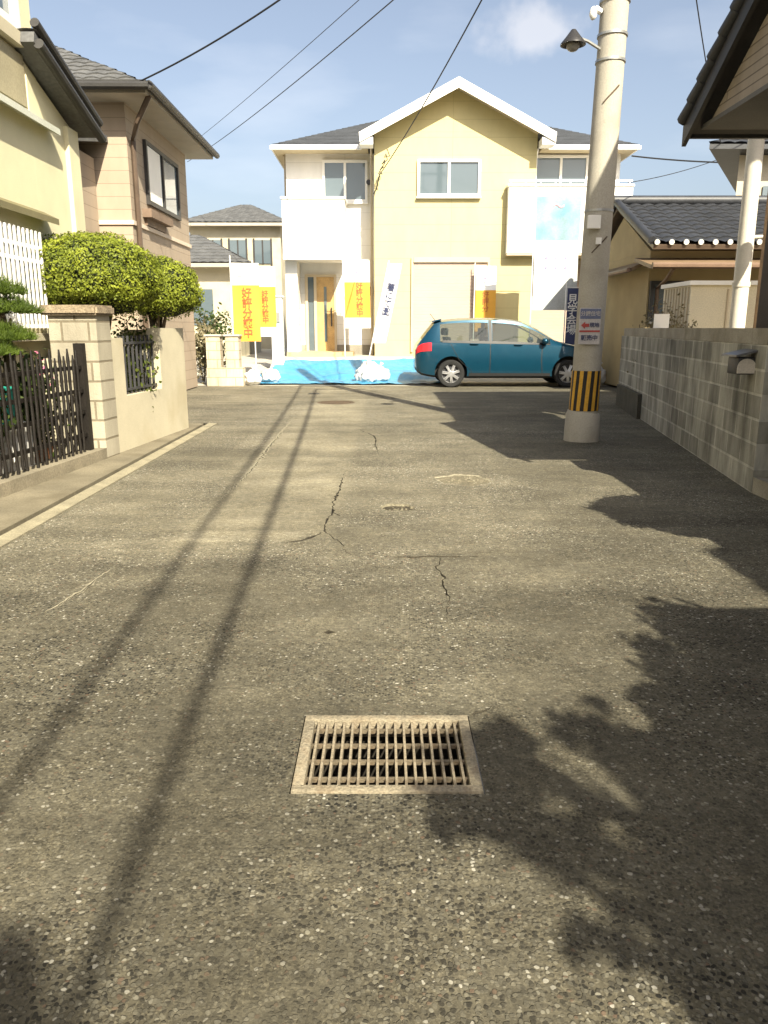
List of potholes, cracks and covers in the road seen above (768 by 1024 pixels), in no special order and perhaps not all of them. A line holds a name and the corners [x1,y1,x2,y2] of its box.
crack [398,555,478,616]
drain grate [291,715,484,794]
crack [281,474,353,555]
